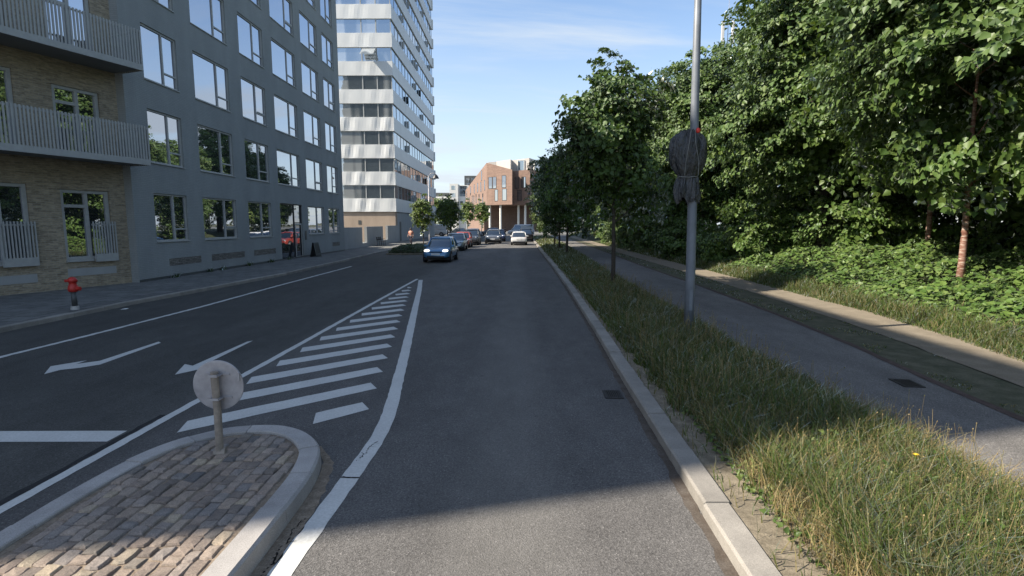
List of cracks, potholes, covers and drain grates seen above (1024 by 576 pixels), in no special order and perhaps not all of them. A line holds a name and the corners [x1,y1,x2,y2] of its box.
drain grate [889,378,926,388]
drain grate [602,390,624,399]
crack [261,521,301,576]
